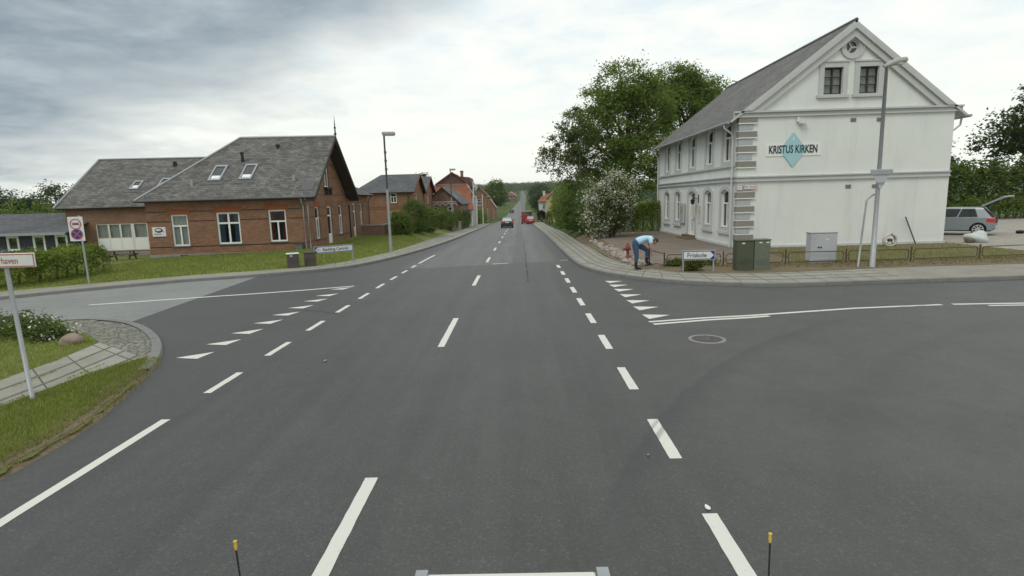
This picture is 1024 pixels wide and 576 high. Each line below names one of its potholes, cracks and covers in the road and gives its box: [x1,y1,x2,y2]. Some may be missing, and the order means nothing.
manhole cover [688,335,726,344]
